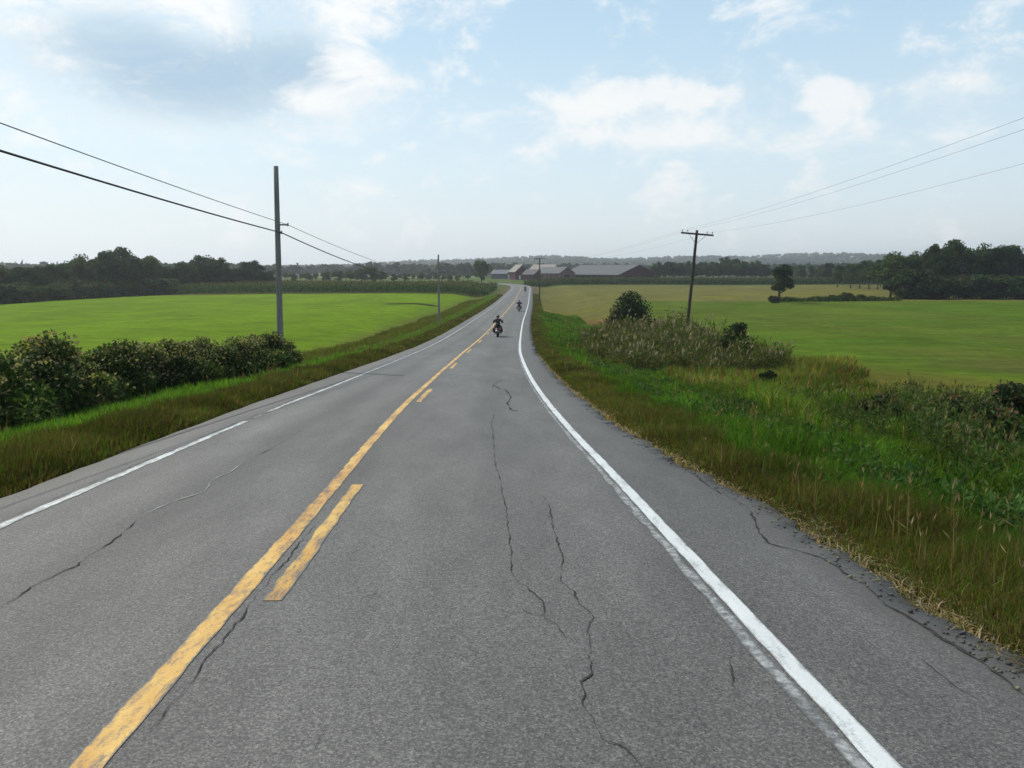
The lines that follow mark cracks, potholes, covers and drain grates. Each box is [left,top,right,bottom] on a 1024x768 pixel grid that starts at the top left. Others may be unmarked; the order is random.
crack [491,381,643,768]
crack [666,458,1023,699]
crack [3,431,299,605]
